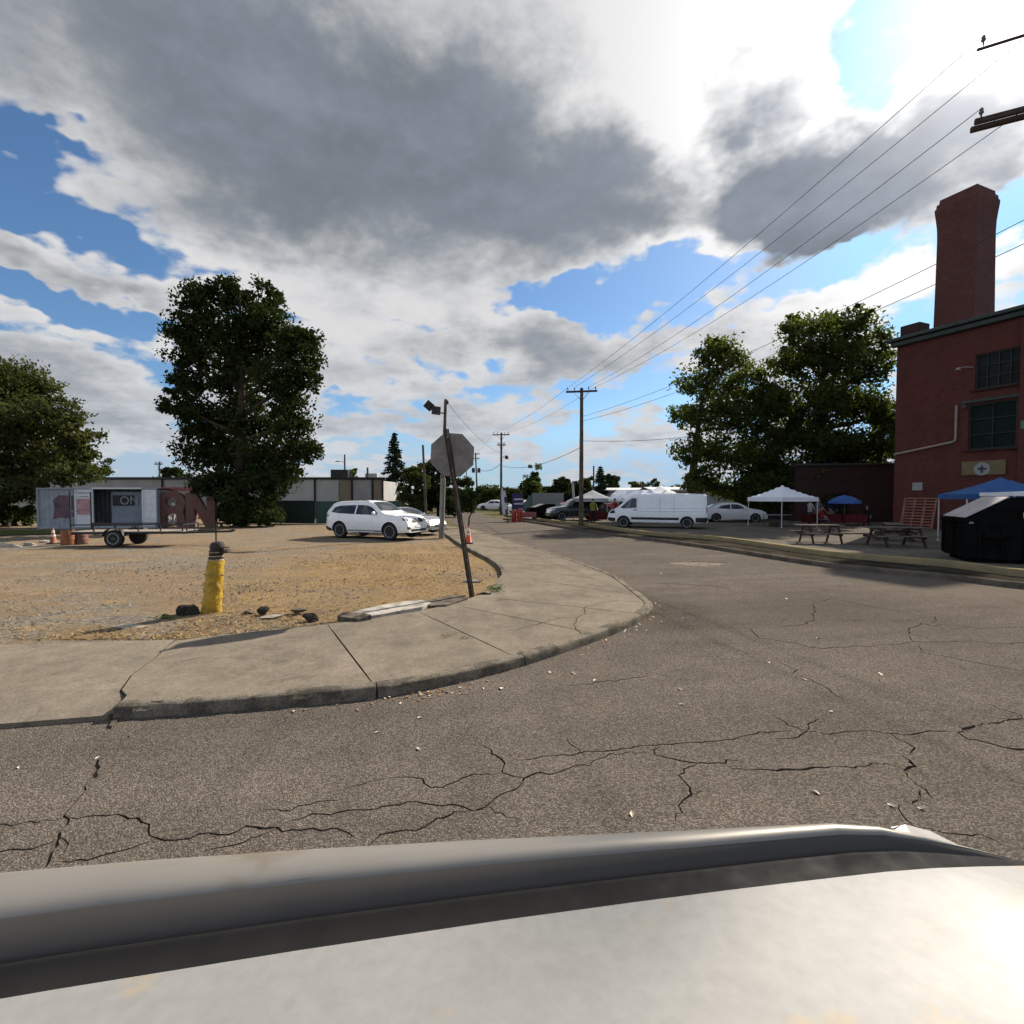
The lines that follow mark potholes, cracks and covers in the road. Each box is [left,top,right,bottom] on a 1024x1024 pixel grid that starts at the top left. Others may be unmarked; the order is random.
crack [0,704,1024,869]
crack [736,599,1024,671]
